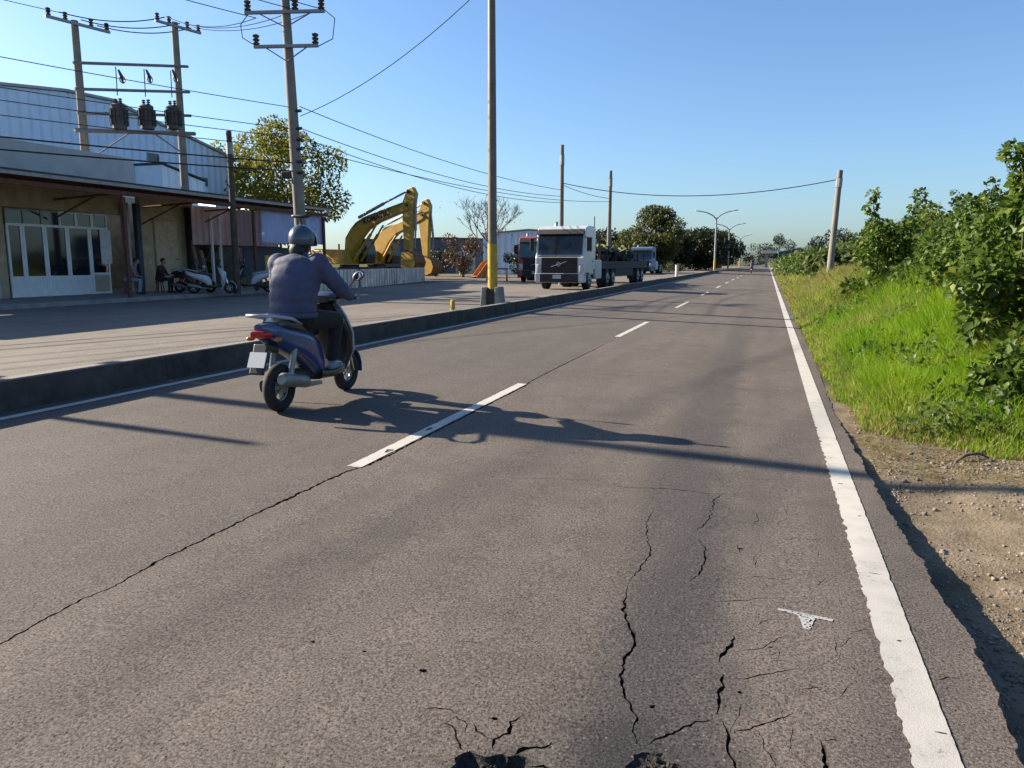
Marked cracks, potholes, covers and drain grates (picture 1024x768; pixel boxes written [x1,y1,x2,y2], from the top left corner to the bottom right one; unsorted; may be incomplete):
pothole [451,751,530,768]
crack [617,486,827,602]
crack [425,707,552,768]
pothole [625,752,686,768]
crack [619,509,841,768]
